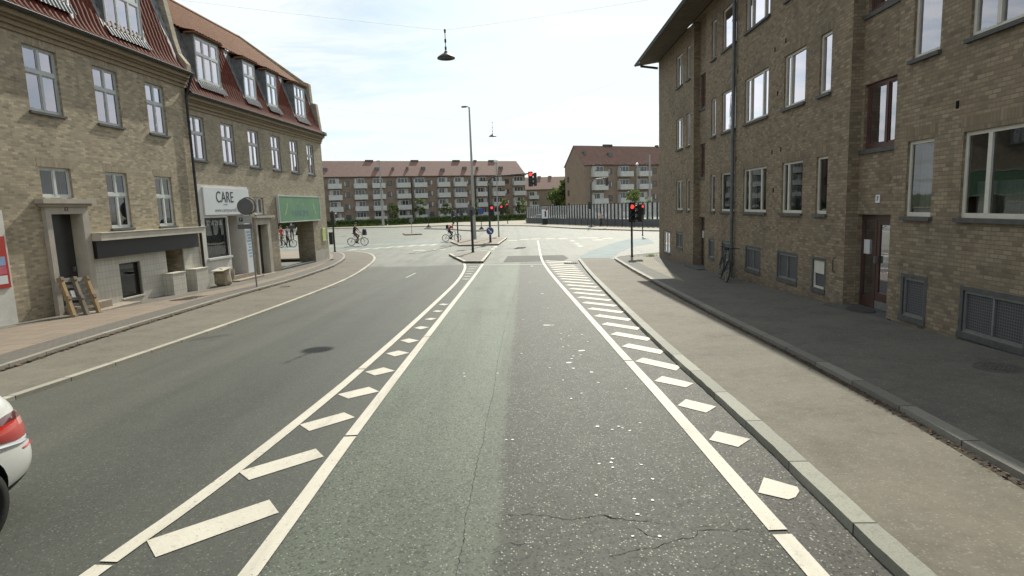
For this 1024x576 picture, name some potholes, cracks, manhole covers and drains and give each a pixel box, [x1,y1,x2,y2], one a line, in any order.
crack [521,513,753,557]
crack [456,278,518,573]
manhole cover [972,362,1024,374]
